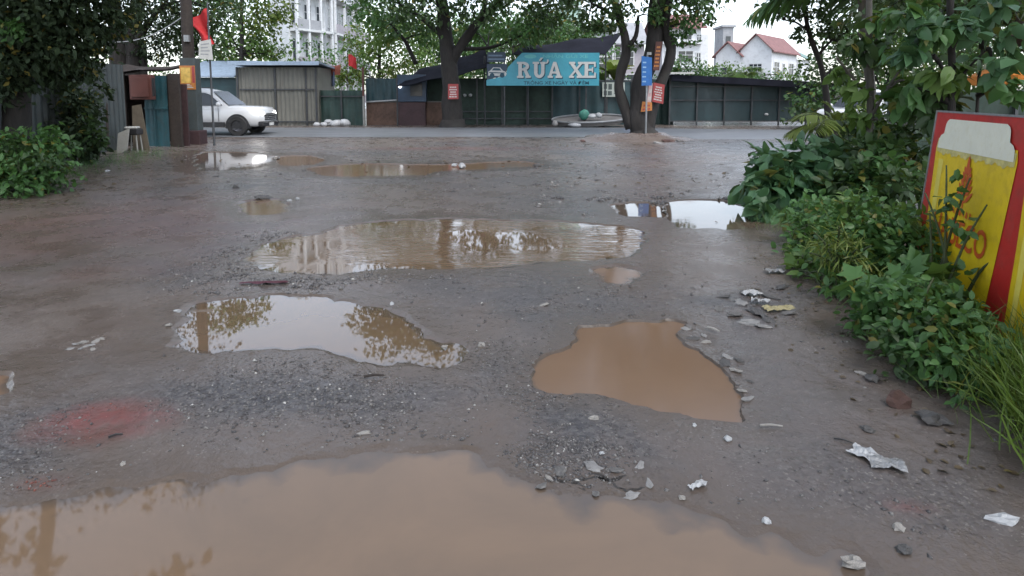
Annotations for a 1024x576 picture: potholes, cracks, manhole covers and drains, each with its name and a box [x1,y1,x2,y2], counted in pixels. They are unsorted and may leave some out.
pothole [192,151,280,171]
pothole [588,263,648,285]
pothole [608,201,668,217]
pothole [235,217,649,275]
pothole [530,319,746,423]
pothole [662,199,766,230]
pothole [165,293,478,369]
pothole [0,439,885,576]
pothole [273,155,326,166]
pothole [233,198,296,215]
pothole [306,161,545,177]
